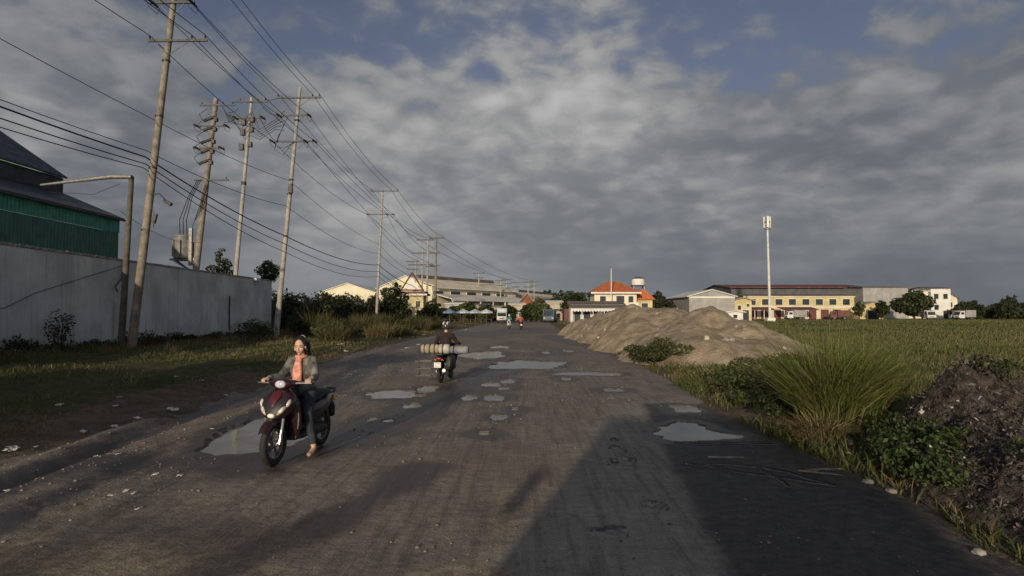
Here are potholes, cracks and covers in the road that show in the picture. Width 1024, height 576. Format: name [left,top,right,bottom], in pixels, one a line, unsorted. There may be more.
pothole [194,418,308,456]
pothole [586,525,634,540]
pothole [652,420,749,442]
pothole [458,351,506,359]
crack [683,462,839,488]
pothole [606,457,638,471]
pothole [486,360,569,369]
pothole [364,390,428,399]
pothole [639,500,671,514]
